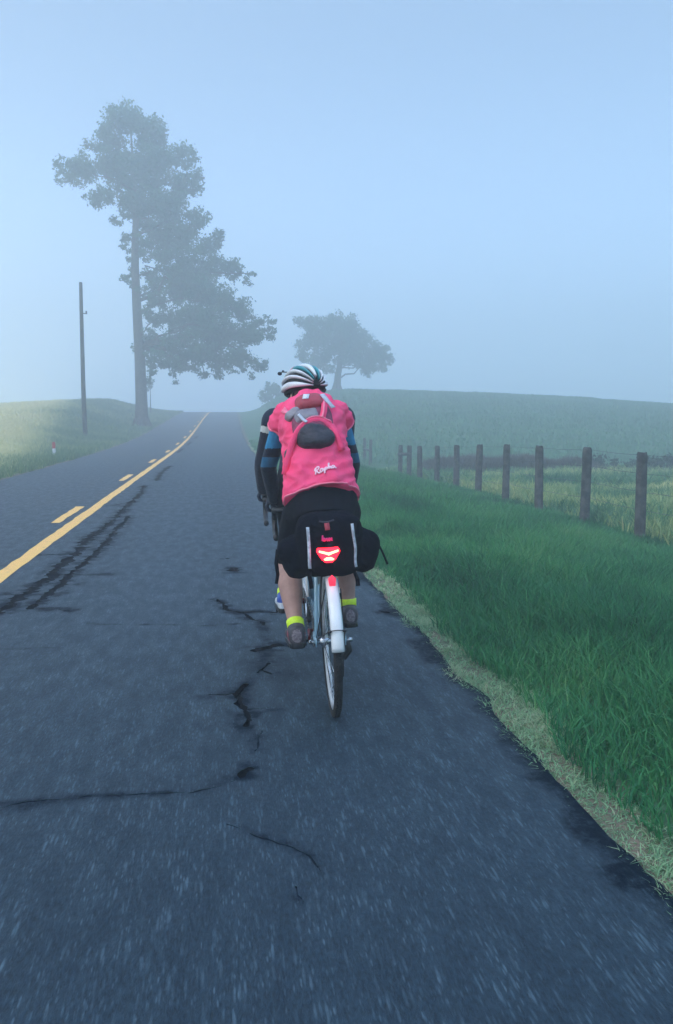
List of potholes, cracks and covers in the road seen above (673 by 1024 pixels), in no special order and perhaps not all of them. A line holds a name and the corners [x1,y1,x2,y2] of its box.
crack [0,780,235,808]
crack [226,824,320,902]
crack [0,436,276,626]
crack [208,663,272,751]
